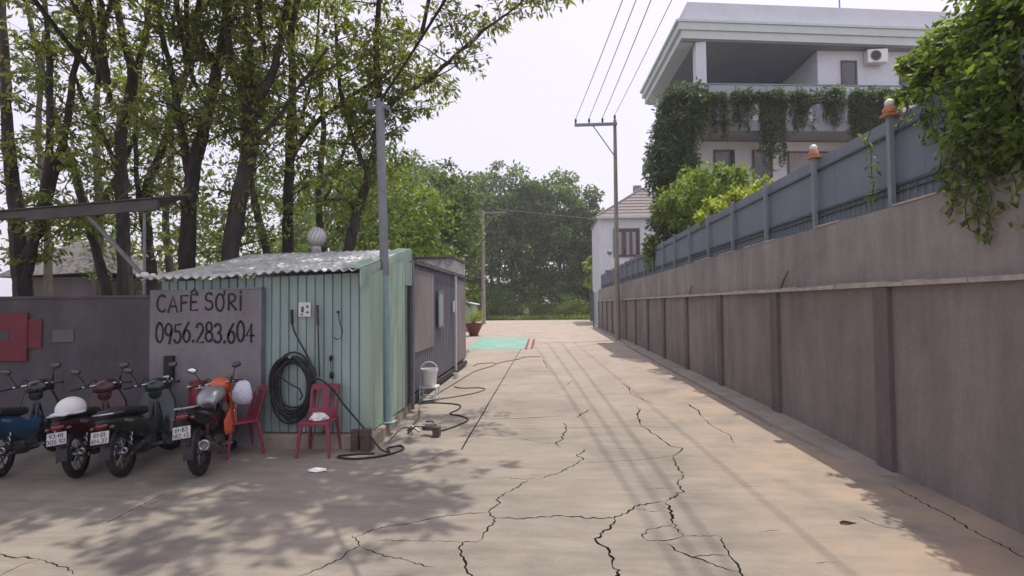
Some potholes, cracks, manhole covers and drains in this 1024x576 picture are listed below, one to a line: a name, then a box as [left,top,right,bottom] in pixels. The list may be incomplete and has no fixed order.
crack [0,554,74,574]
crack [300,385,775,576]
crack [893,486,1024,557]
